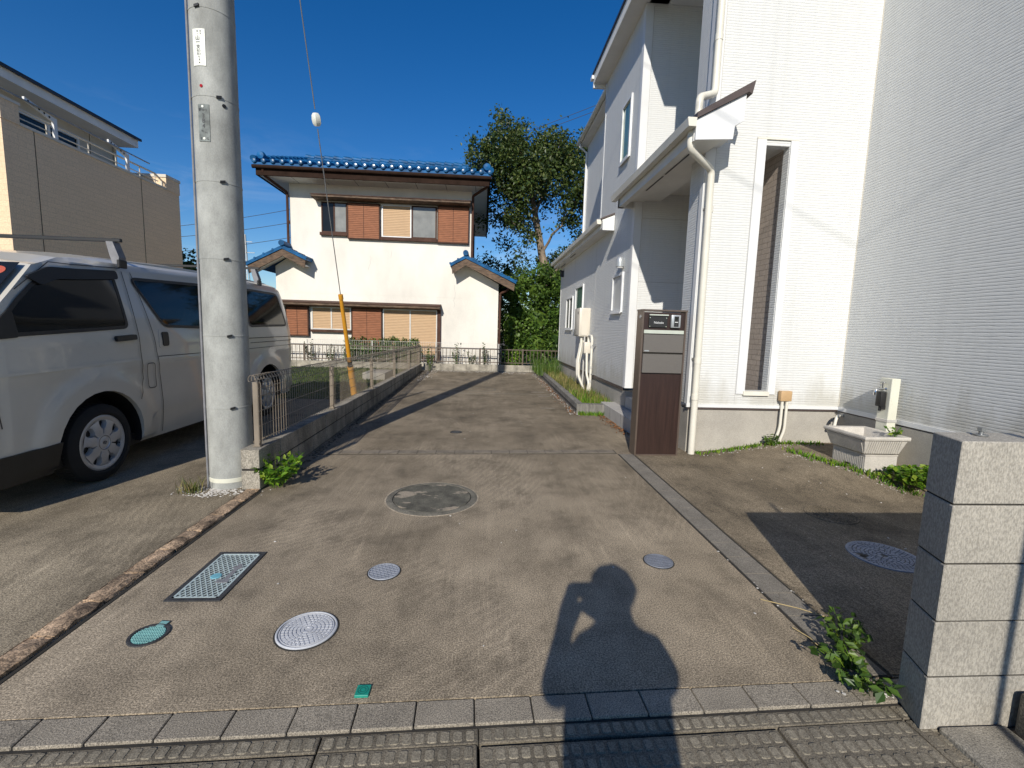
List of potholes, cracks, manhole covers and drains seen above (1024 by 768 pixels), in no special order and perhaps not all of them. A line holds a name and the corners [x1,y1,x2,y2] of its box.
manhole cover [845,541,916,573]
manhole cover [384,482,479,517]
manhole cover [367,563,401,581]
manhole cover [126,620,172,648]
manhole cover [273,611,340,652]
manhole cover [643,554,675,569]
